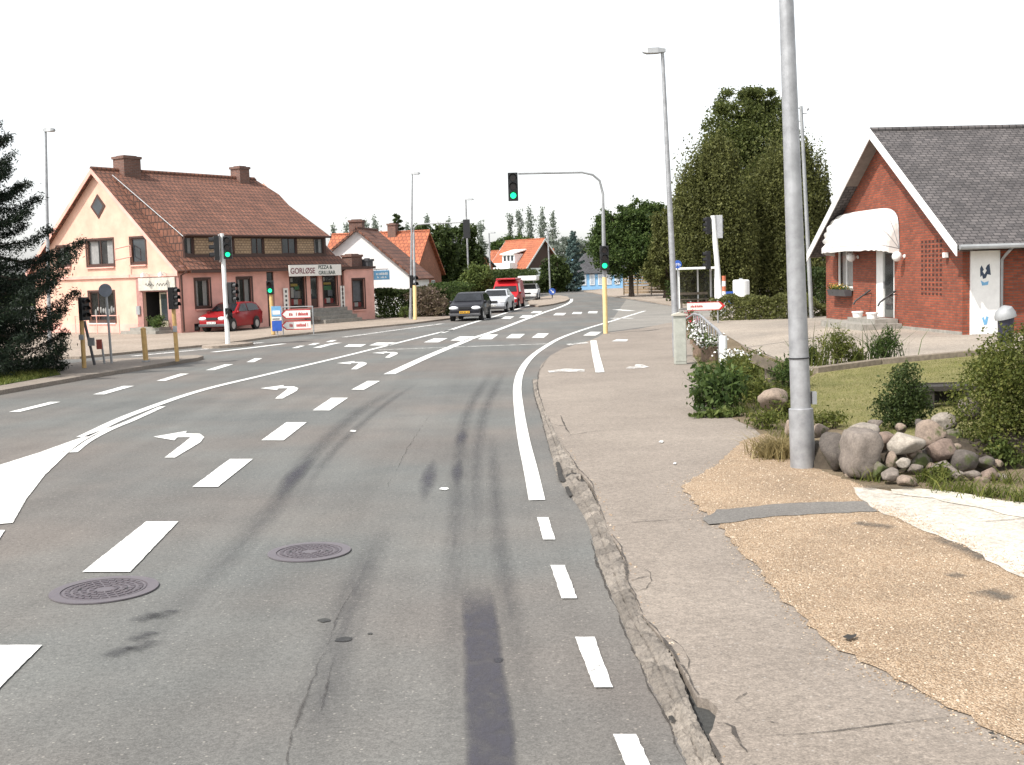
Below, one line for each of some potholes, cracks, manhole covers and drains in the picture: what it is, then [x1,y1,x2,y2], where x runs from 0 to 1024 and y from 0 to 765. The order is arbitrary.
manhole cover [48,575,159,605]
crack [717,722,748,752]
manhole cover [267,542,351,562]
crack [532,382,632,453]
